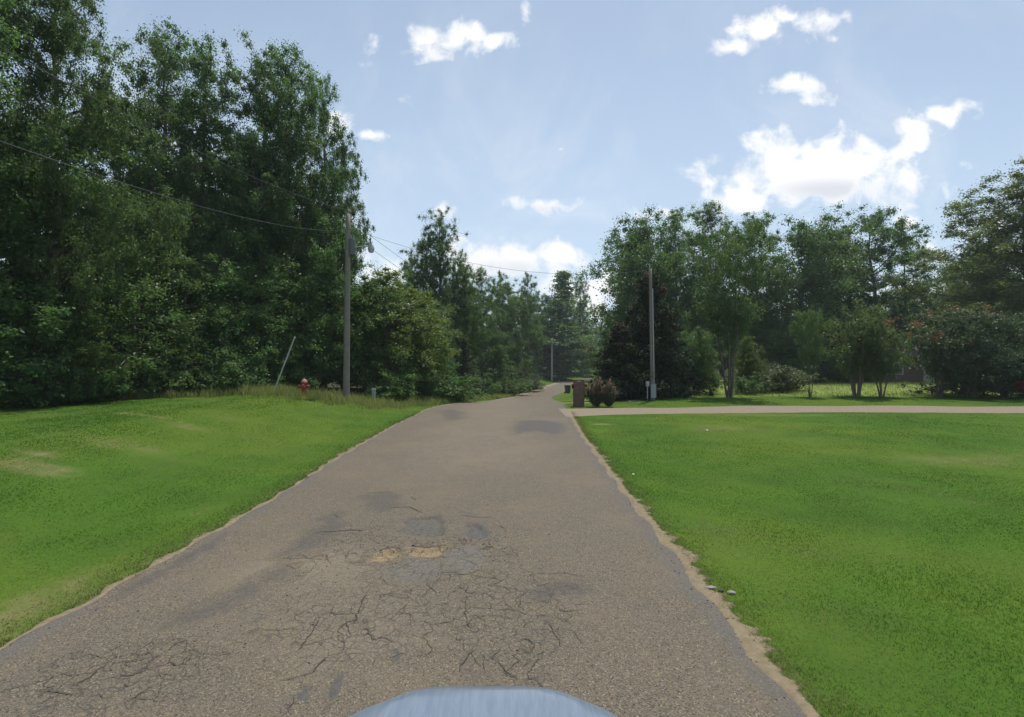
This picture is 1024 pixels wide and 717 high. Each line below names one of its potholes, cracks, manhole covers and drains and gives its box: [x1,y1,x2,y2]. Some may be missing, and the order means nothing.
pothole [352,540,462,568]
crack [3,632,230,707]
crack [267,515,589,687]
